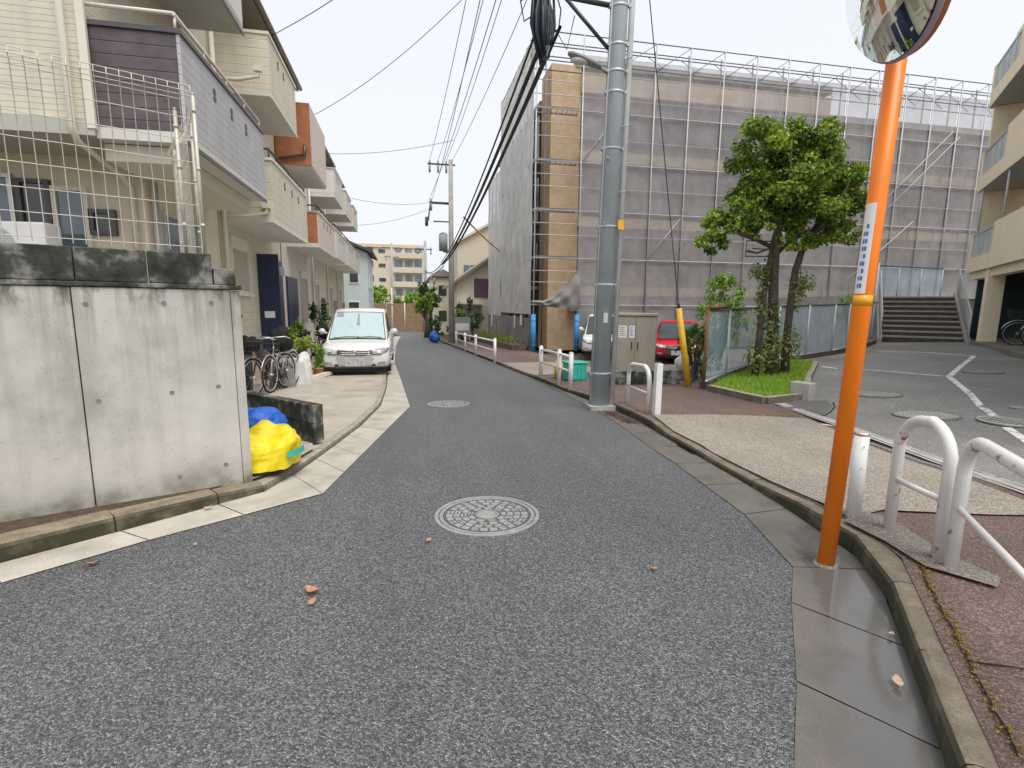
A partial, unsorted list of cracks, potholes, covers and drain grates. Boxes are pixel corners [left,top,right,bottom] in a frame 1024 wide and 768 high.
manhole cover [859,390,903,398]
manhole cover [427,400,469,408]
manhole cover [434,496,539,537]
manhole cover [891,410,962,422]
